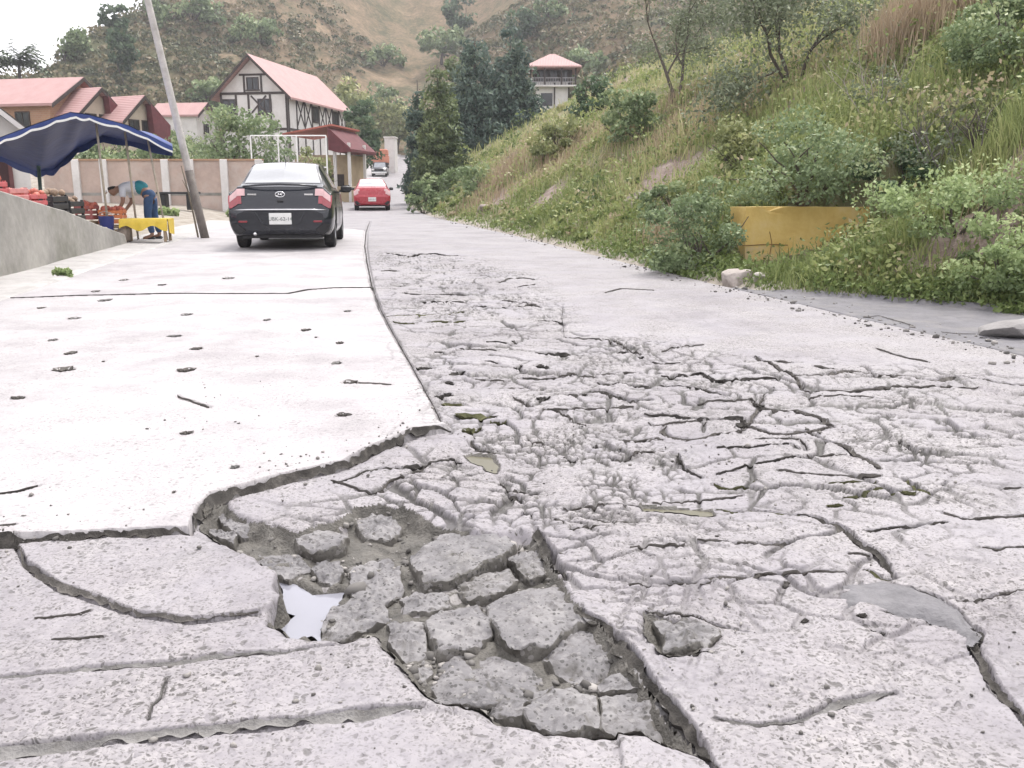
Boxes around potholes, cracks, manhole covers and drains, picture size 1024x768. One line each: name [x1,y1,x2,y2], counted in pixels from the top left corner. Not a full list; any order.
crack [915,589,1024,726]
crack [193,222,1024,588]
pothole [464,453,500,474]
crack [0,485,38,495]
crack [0,523,423,761]
pothole [199,502,697,756]
crack [577,608,895,768]
pothole [642,612,718,658]
pothole [639,502,716,517]
